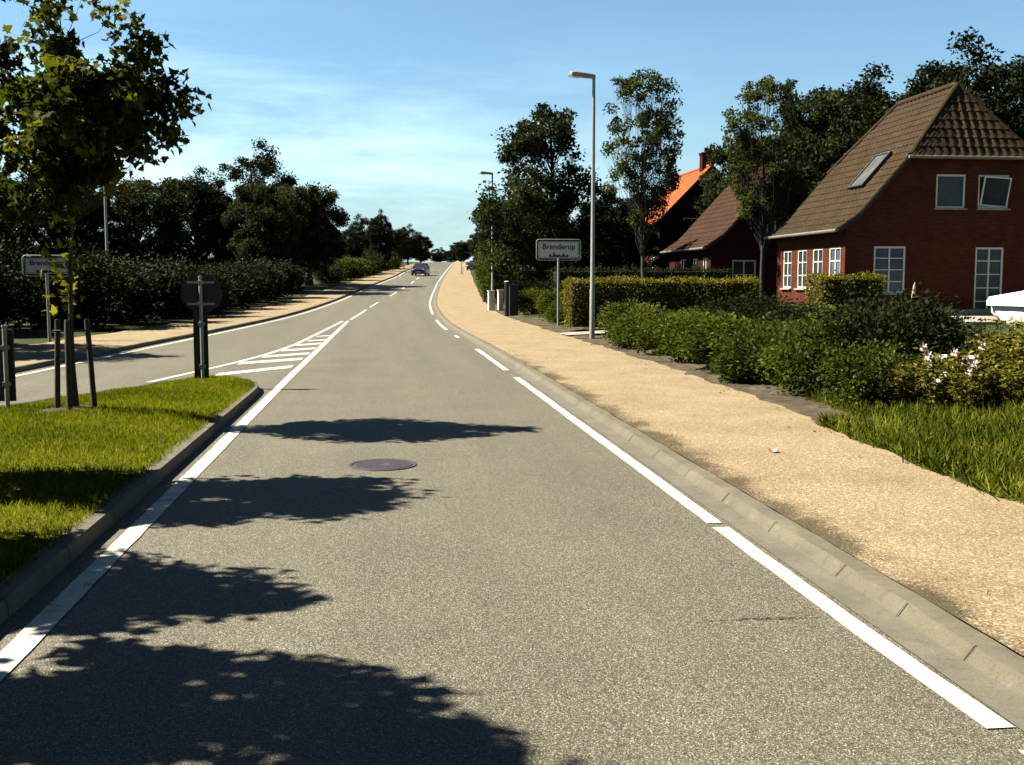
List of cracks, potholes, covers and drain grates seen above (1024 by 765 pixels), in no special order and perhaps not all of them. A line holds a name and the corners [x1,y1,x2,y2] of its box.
manhole cover [348,459,417,471]
